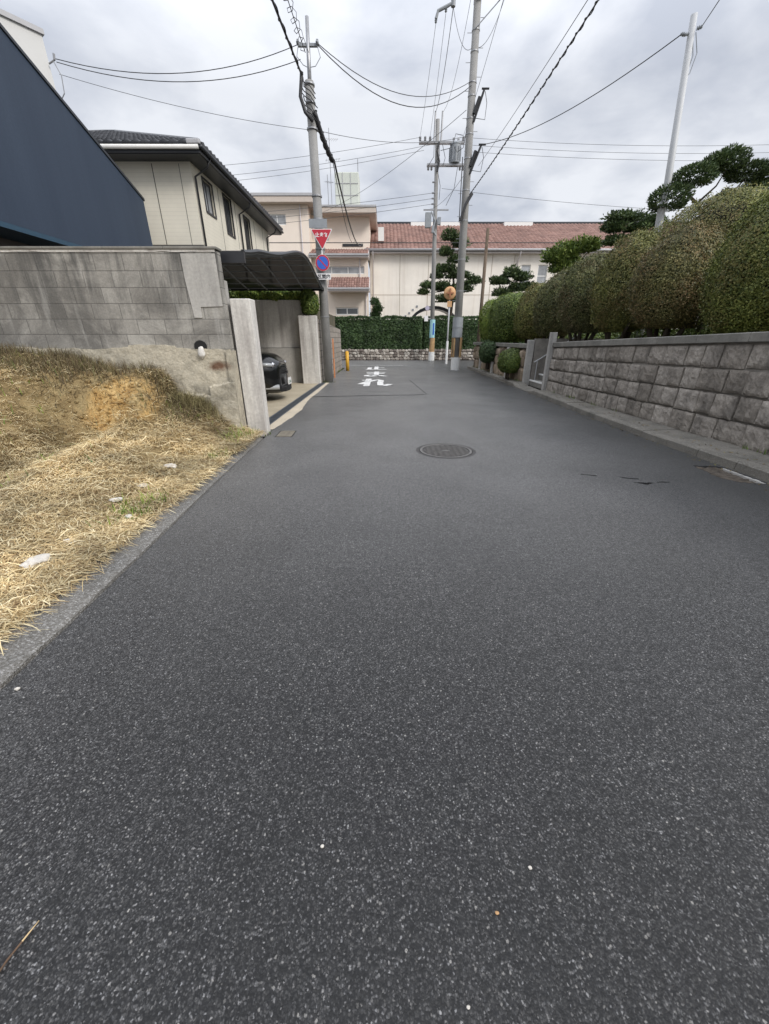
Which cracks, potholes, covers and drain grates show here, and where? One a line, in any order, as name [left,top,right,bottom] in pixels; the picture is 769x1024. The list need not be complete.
manhole cover [416,443,476,459]
